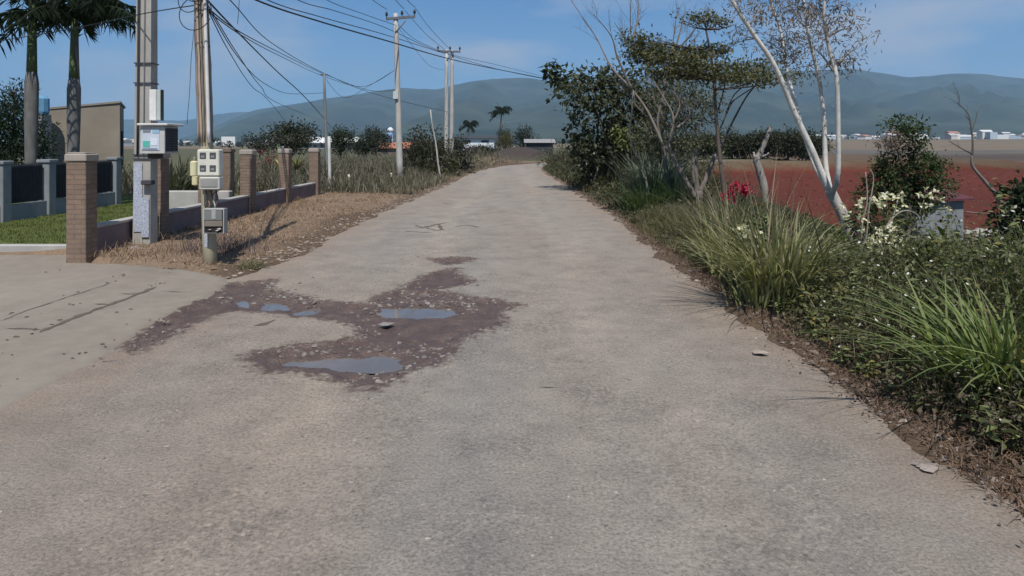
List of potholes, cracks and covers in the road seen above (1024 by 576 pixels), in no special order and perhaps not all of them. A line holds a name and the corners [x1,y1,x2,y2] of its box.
crack [411,222,478,233]
pothole [405,268,471,291]
pothole [249,338,454,386]
pothole [129,280,328,350]
pothole [321,291,520,353]
pothole [427,257,473,265]
